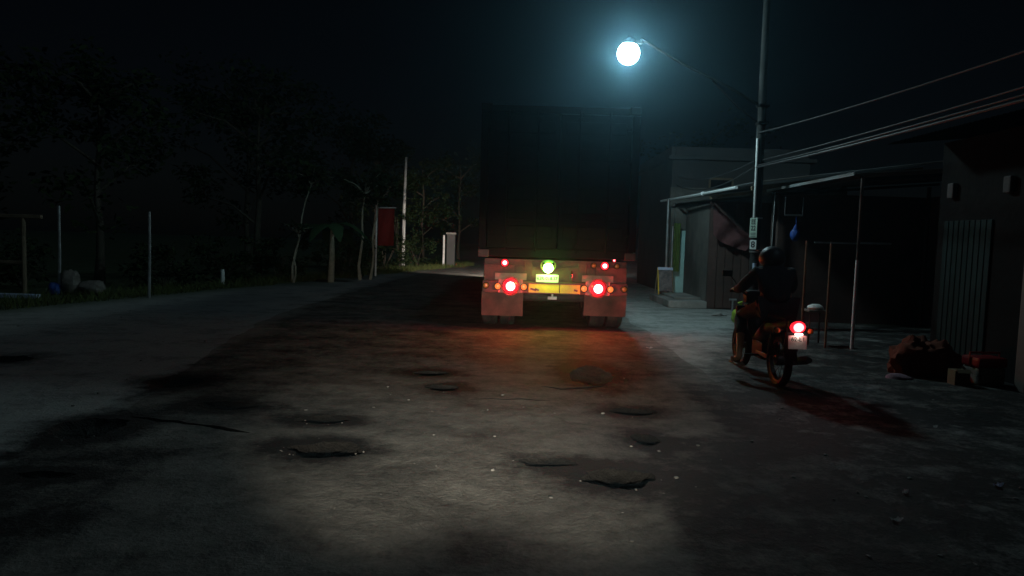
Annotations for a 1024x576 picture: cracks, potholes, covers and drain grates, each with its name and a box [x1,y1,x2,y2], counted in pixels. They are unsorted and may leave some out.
pothole [294,415,351,425]
pothole [579,469,662,491]
pothole [280,442,366,458]
pothole [609,408,657,416]
pothole [569,365,613,386]
crack [135,417,249,433]
pothole [519,458,578,467]
pothole [630,434,661,446]
crack [485,386,602,401]
